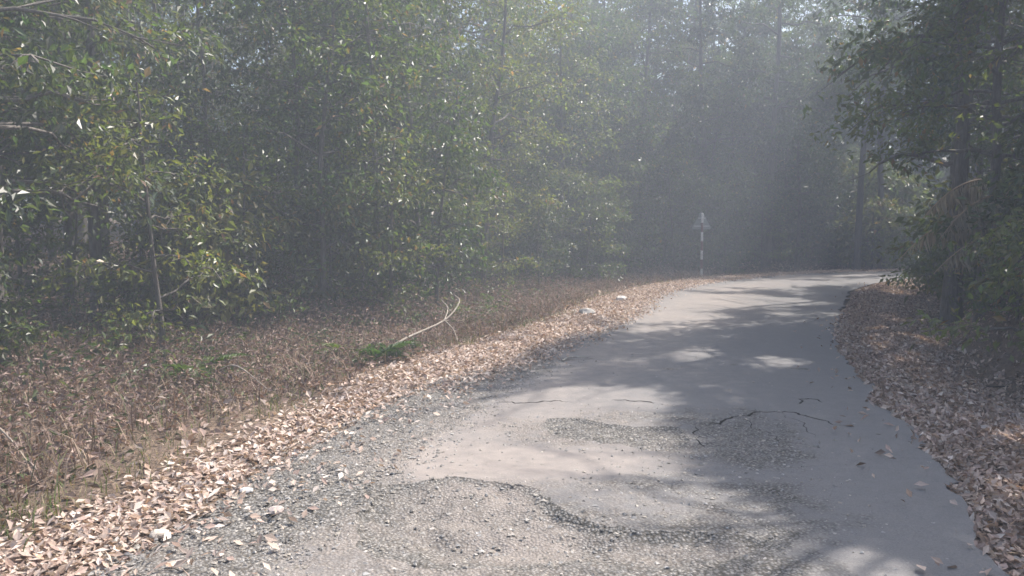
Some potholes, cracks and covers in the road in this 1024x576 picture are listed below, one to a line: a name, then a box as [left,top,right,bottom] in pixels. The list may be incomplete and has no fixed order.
pothole [353,476,770,571]
crack [687,398,851,450]
pothole [542,418,692,452]
